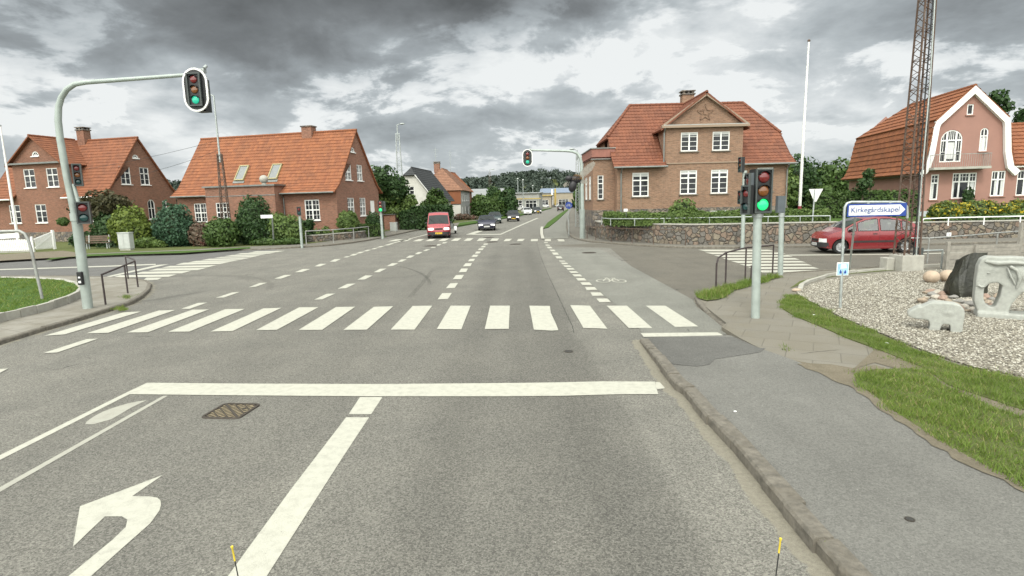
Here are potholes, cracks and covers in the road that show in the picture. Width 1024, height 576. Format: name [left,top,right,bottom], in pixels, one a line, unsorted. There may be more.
drain grate [201,403,260,419]
